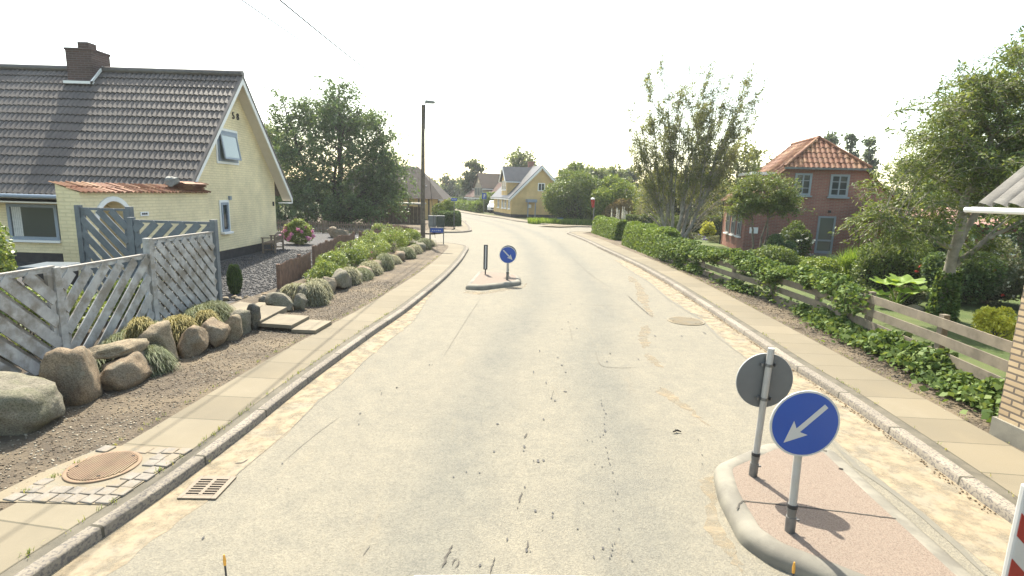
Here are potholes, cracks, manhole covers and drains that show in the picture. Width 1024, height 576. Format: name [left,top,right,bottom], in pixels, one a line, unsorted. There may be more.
drain grate [177,476,237,500]
manhole cover [62,450,142,484]
manhole cover [667,316,705,326]
